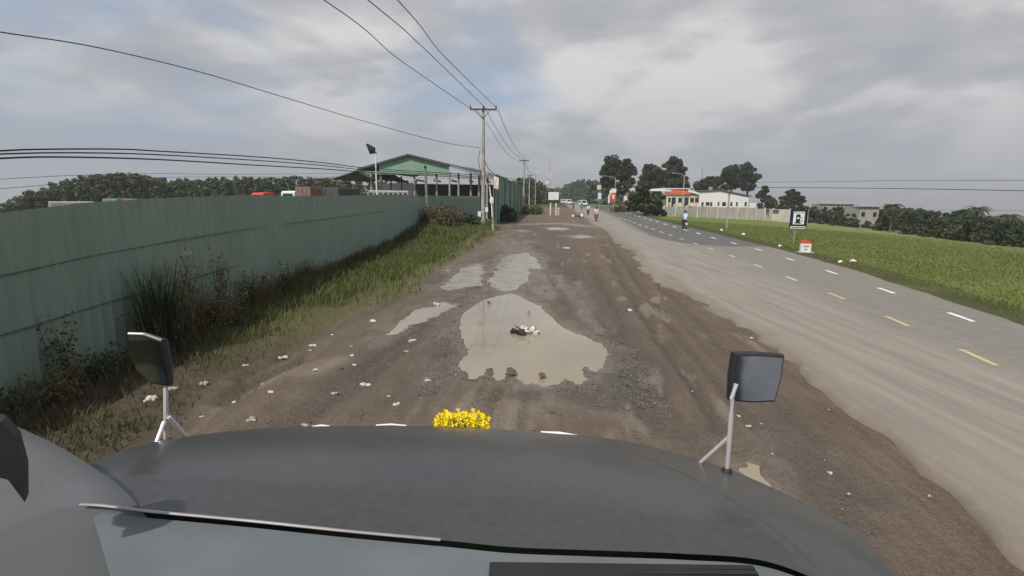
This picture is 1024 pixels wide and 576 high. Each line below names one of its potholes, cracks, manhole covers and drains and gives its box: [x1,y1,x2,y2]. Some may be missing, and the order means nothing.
pothole [452,292,615,389]
pothole [380,300,460,336]
pothole [482,252,545,292]
pothole [730,455,783,490]
pothole [436,262,490,291]
